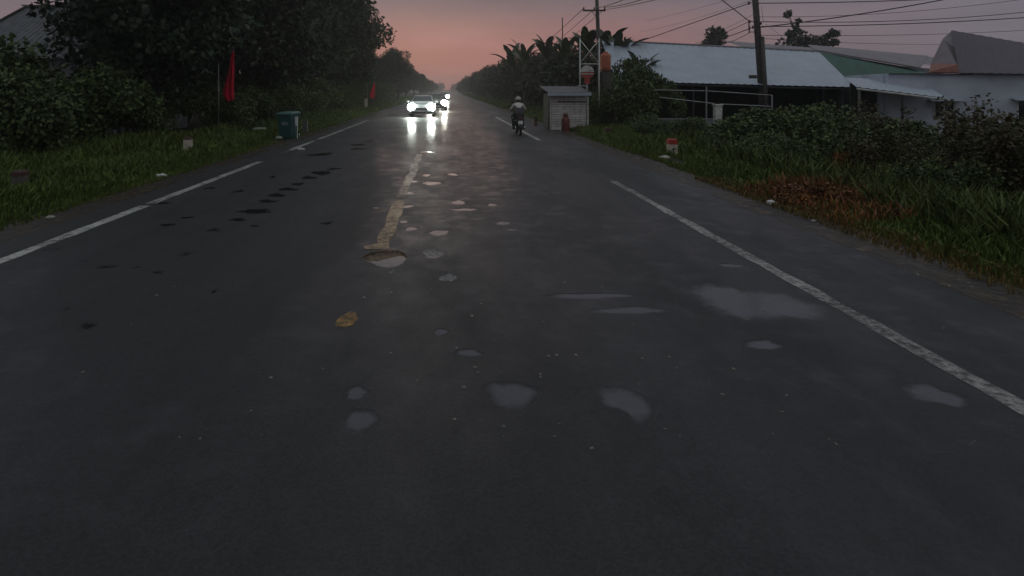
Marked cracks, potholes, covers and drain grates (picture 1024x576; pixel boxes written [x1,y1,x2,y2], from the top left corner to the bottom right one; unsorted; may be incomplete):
pothole [343,408,381,435]
pothole [896,382,977,410]
pothole [589,384,657,427]
pothole [482,380,542,411]
pothole [422,249,444,258]
pothole [741,339,788,350]
pothole [362,250,407,267]
pothole [345,385,371,401]
pothole [425,229,452,237]
pothole [455,349,484,357]
